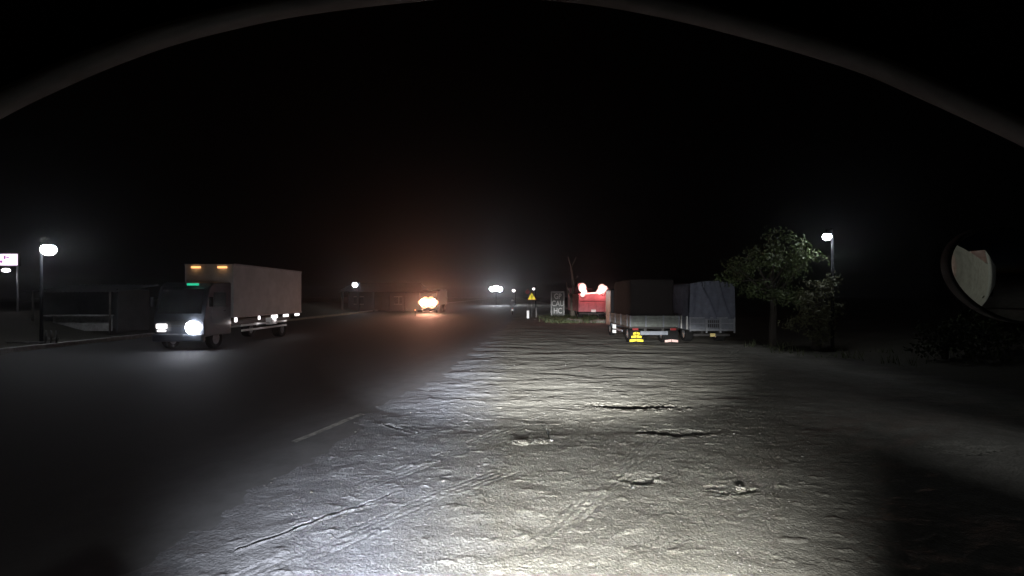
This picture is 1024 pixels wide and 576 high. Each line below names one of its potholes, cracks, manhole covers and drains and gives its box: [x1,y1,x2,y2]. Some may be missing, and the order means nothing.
pothole [604,470,669,486]
pothole [699,483,764,496]
crack [230,488,408,553]
